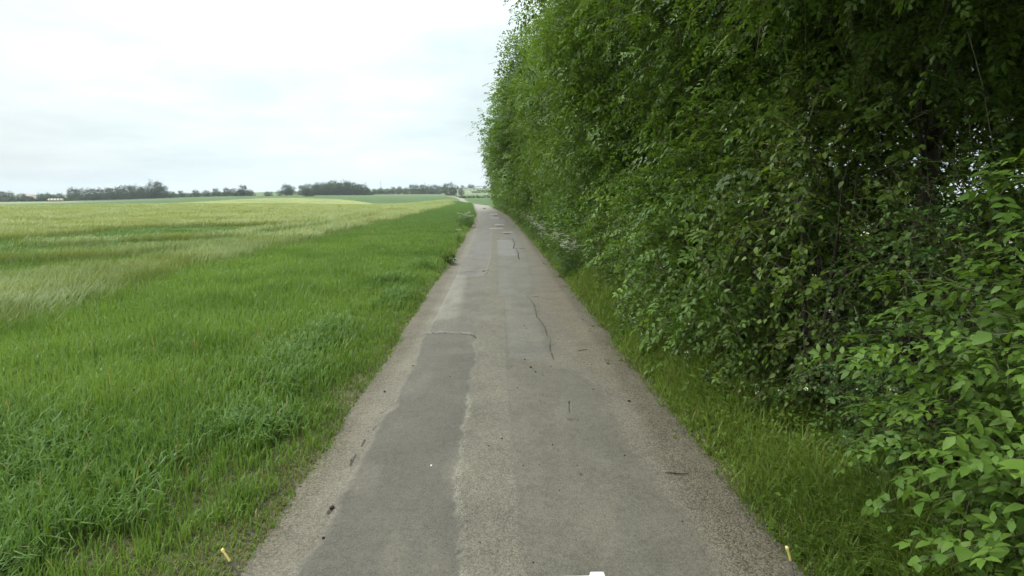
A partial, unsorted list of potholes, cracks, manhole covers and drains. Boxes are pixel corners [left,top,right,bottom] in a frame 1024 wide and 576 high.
crack [528,296,555,360]
